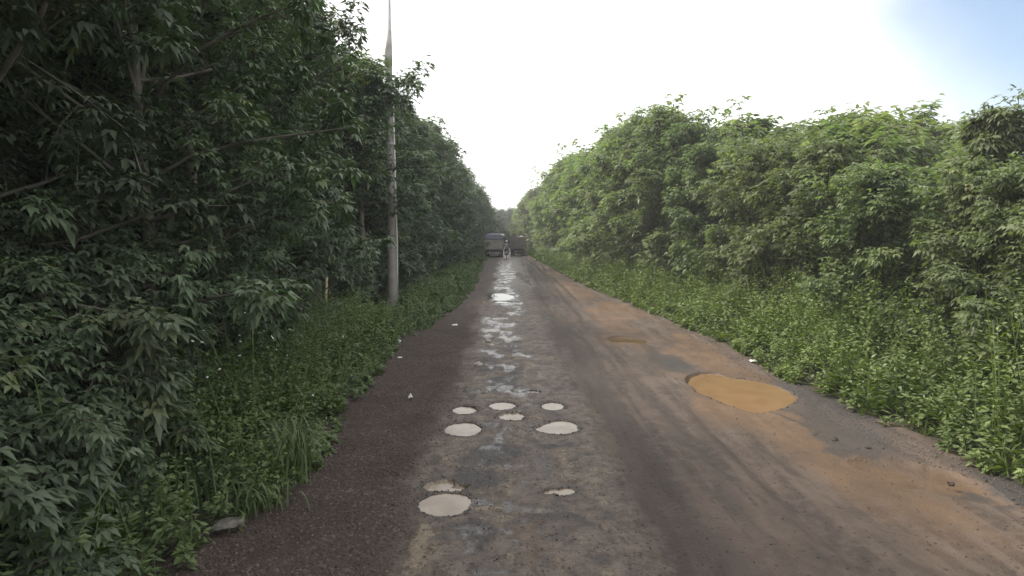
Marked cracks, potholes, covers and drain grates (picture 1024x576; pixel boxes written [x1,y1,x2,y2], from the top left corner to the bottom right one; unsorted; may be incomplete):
pothole [439,420,486,437]
pothole [417,475,471,493]
pothole [538,400,567,410]
pothole [488,400,518,411]
pothole [605,335,647,344]
pothole [496,411,529,421]
pothole [532,418,583,435]
pothole [415,489,478,517]
pothole [449,404,479,415]
pothole [682,371,801,414]
pothole [538,486,578,497]
